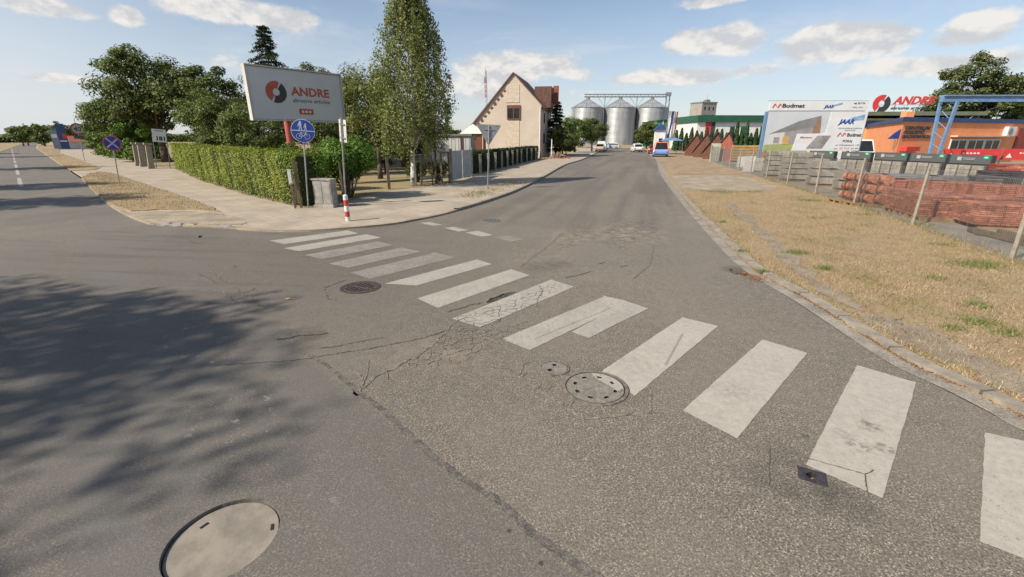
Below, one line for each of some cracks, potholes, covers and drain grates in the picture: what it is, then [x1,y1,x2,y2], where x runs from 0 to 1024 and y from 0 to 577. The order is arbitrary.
manhole cover [539,361,569,377]
manhole cover [159,499,280,577]
manhole cover [562,371,629,406]
manhole cover [796,465,827,487]
crack [768,448,873,499]
manhole cover [340,281,381,294]
